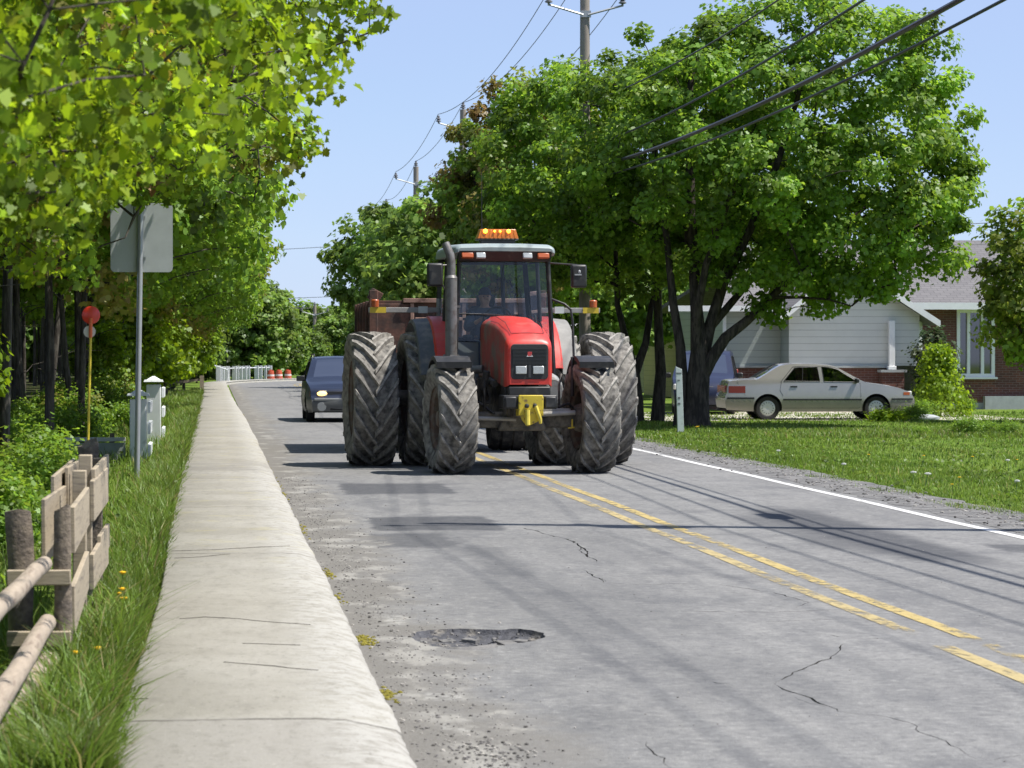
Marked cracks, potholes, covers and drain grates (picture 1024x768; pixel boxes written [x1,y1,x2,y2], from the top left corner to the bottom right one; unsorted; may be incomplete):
pothole [411,629,545,649]
crack [676,584,1019,759]
crack [524,528,651,585]
